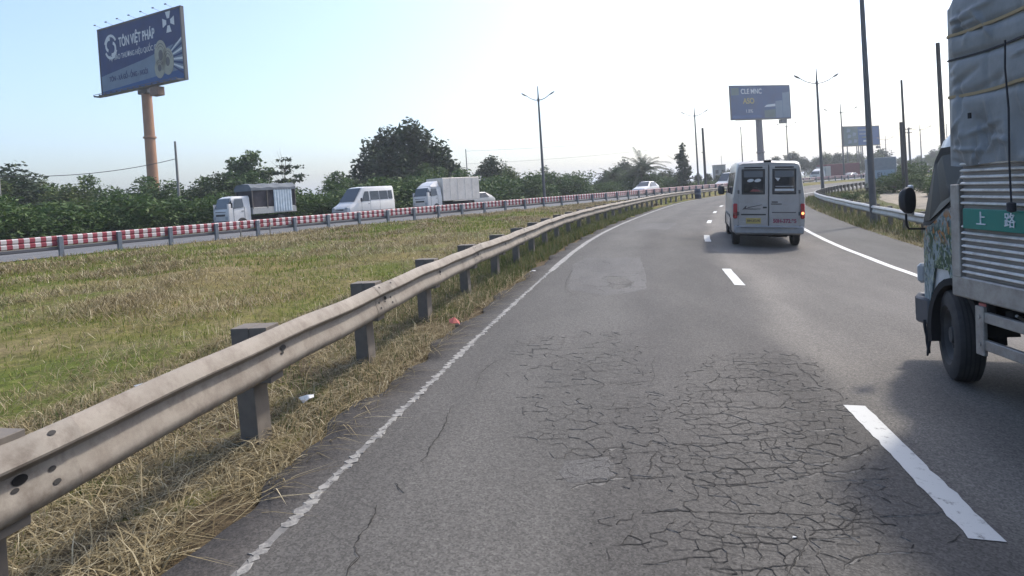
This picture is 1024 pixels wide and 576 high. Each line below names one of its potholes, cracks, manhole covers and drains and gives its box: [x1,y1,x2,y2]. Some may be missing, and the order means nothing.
crack [345,331,660,576]
crack [516,350,960,576]
